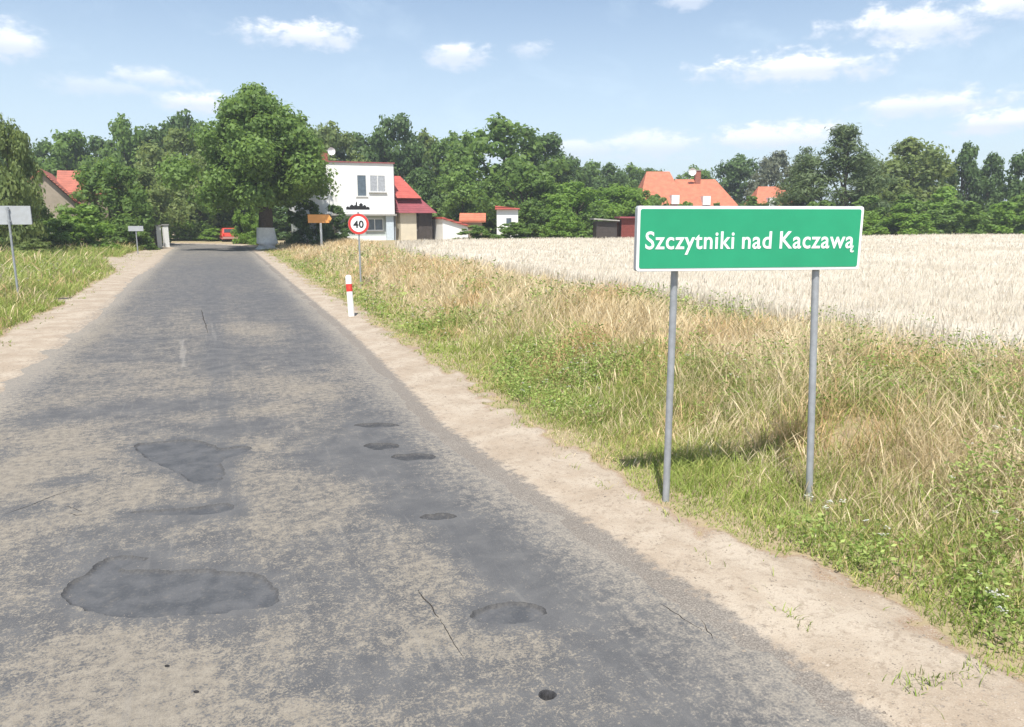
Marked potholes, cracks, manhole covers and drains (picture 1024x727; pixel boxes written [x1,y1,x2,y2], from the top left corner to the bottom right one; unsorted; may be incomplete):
pothole [470,601,547,624]
pothole [538,689,557,701]
crack [419,592,464,658]
pothole [391,453,436,461]
